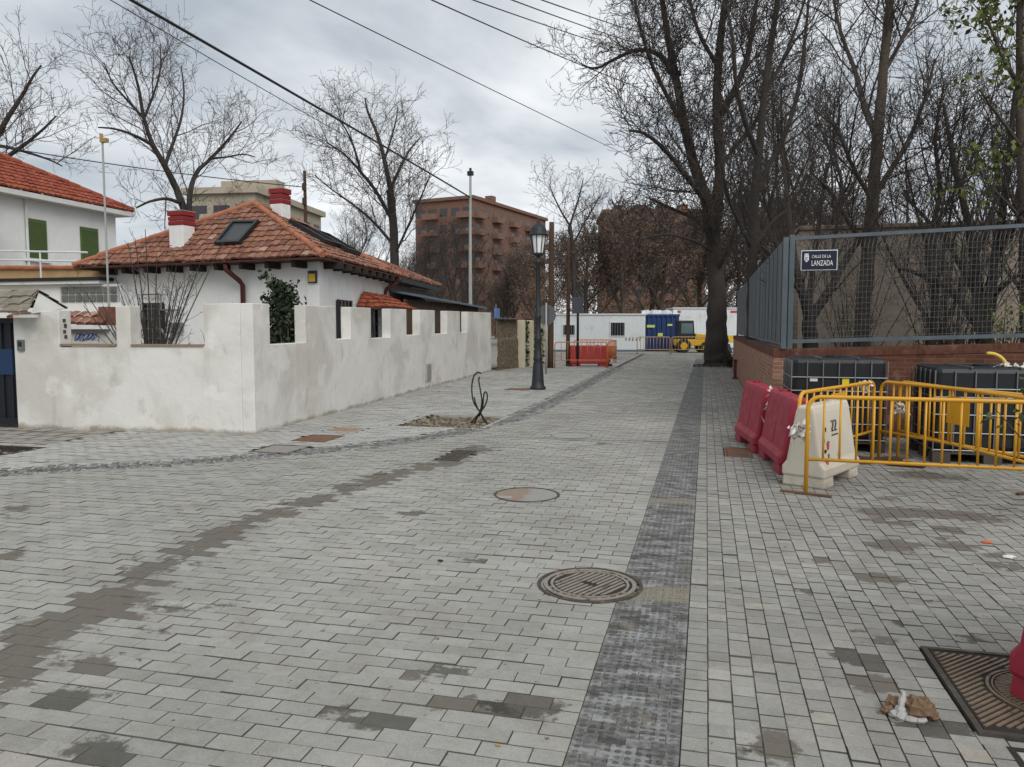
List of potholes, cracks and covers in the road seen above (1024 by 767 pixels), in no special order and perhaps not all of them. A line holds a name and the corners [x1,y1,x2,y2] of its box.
manhole cover [494,487,560,503]
utility cover [291,434,343,443]
manhole cover [537,567,643,604]
utility cover [724,447,753,458]
